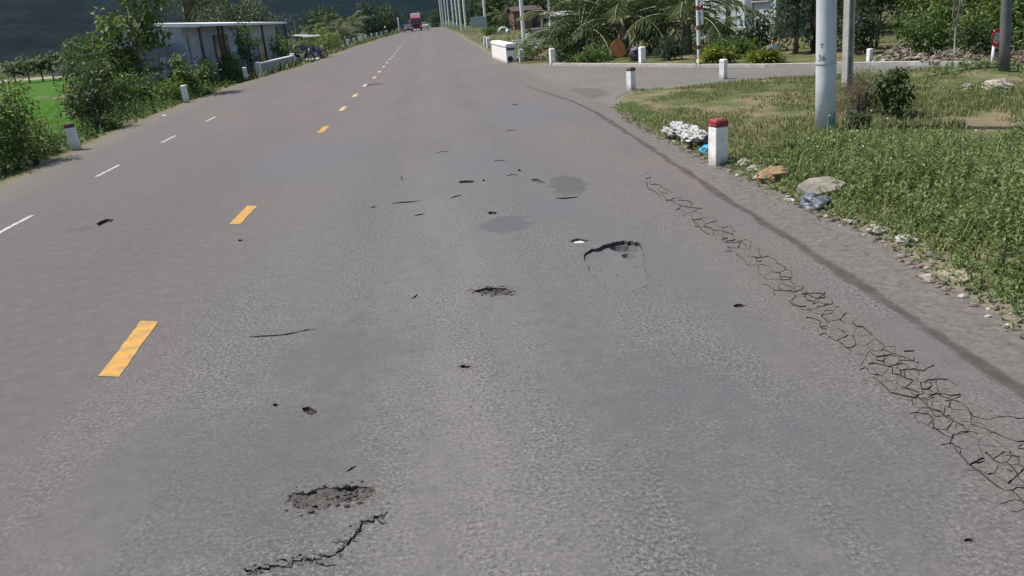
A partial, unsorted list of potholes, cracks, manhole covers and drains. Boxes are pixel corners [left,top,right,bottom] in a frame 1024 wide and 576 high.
crack [645,170,1024,512]
crack [243,511,397,576]
crack [250,329,314,337]
pothole [284,480,374,516]
pothole [584,240,650,295]
pothole [467,285,515,297]
